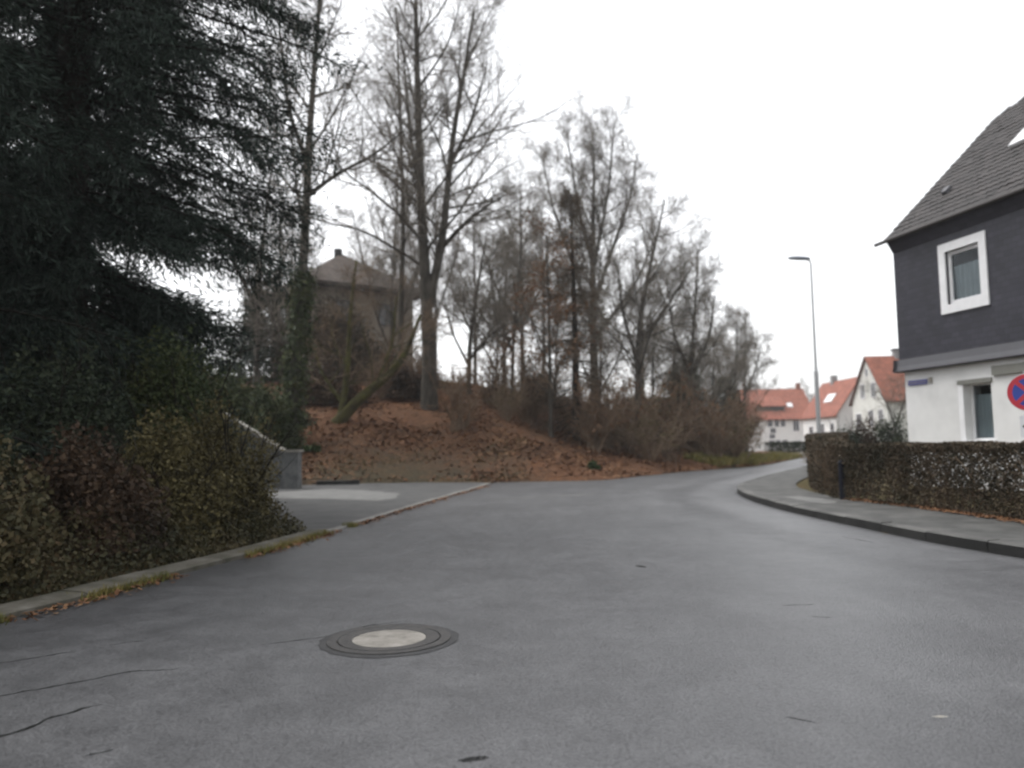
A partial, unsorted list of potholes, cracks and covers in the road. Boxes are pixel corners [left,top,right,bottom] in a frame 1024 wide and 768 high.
crack [0,667,182,756]
manhole cover [318,623,459,658]
